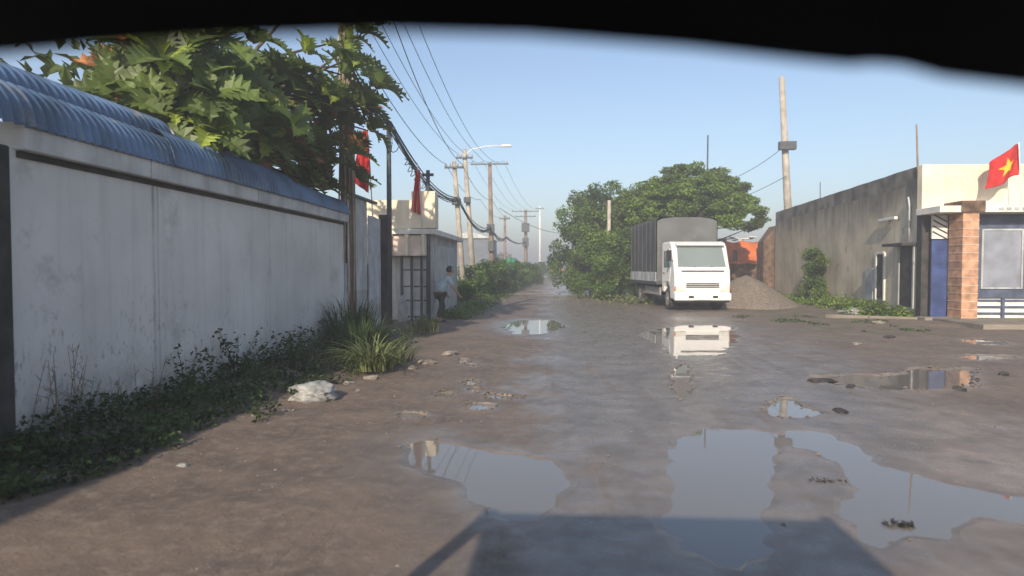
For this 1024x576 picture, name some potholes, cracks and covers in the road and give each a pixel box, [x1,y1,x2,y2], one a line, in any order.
pothole [482,390,526,399]
pothole [809,365,982,391]
pothole [460,400,502,410]
pothole [760,395,825,418]
pothole [395,409,428,420]
pothole [430,389,458,397]
pothole [666,363,695,401]
pothole [458,377,482,386]
